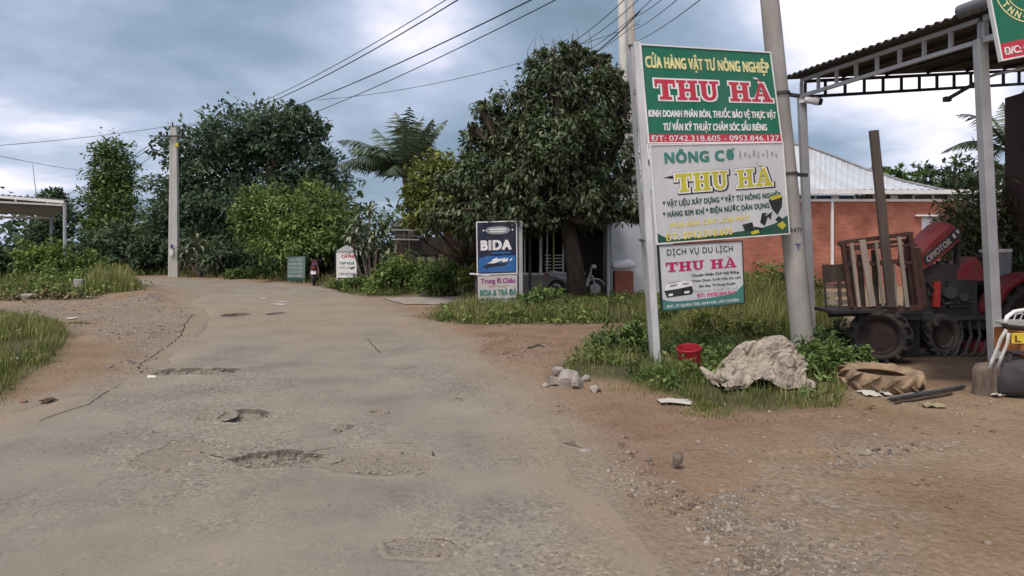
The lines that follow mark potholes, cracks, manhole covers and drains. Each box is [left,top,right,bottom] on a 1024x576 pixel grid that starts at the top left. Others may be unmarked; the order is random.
crack [39,387,117,421]
pothole [134,367,254,377]
pothole [211,408,274,425]
pothole [216,447,343,472]
